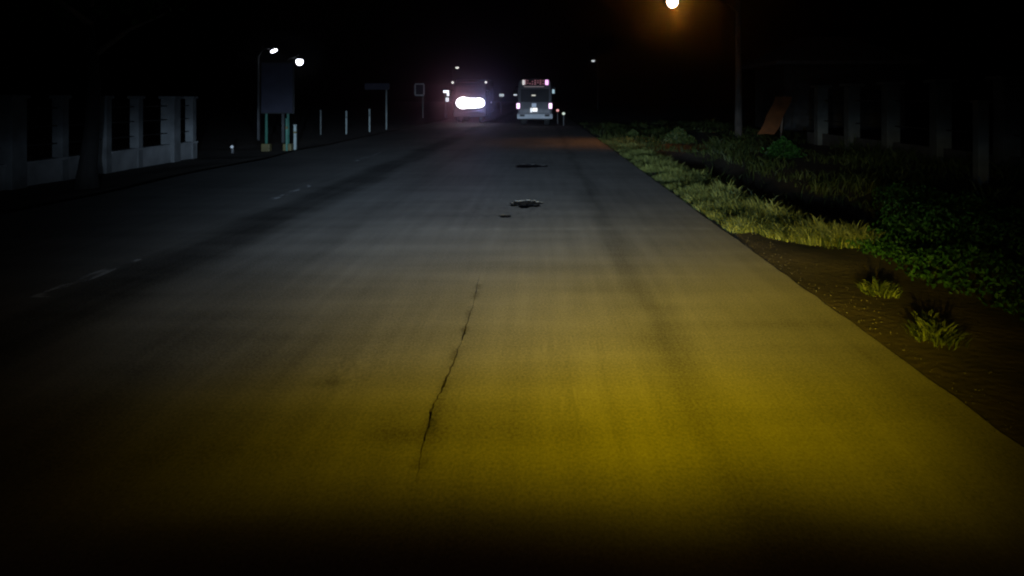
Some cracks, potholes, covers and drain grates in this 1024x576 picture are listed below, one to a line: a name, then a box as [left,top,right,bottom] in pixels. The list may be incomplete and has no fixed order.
pothole [510,200,544,208]
crack [417,279,479,474]
